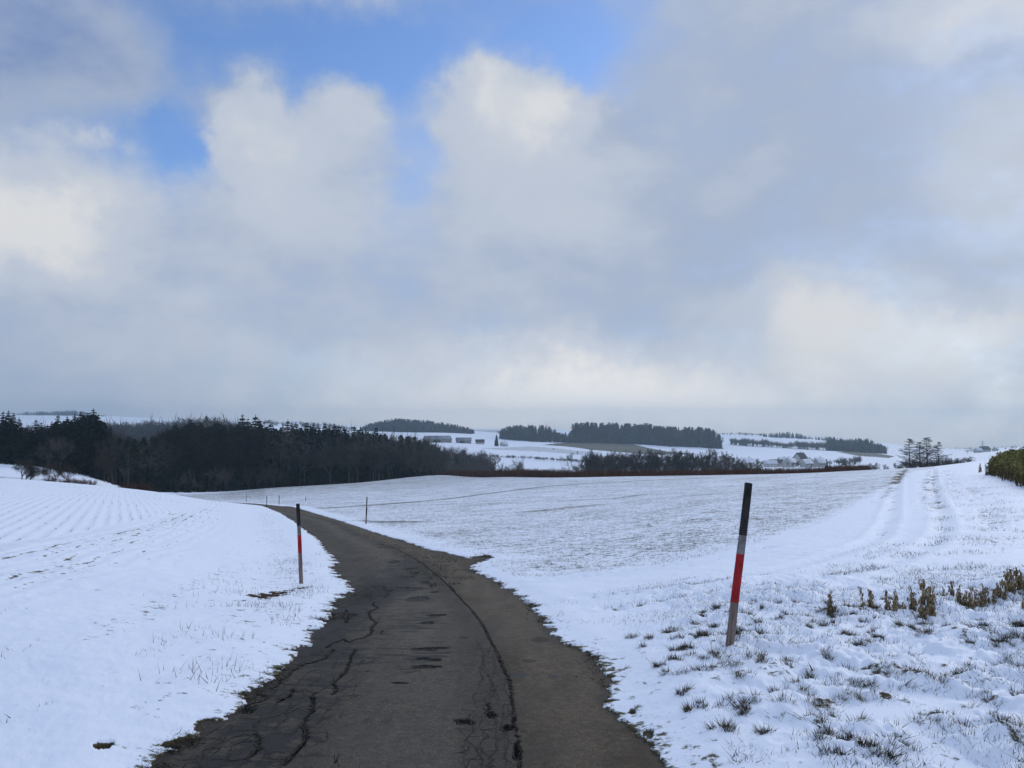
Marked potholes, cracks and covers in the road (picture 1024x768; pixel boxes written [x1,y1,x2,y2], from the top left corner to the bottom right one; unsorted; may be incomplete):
crack [180,583,393,768]
crack [457,641,514,768]
